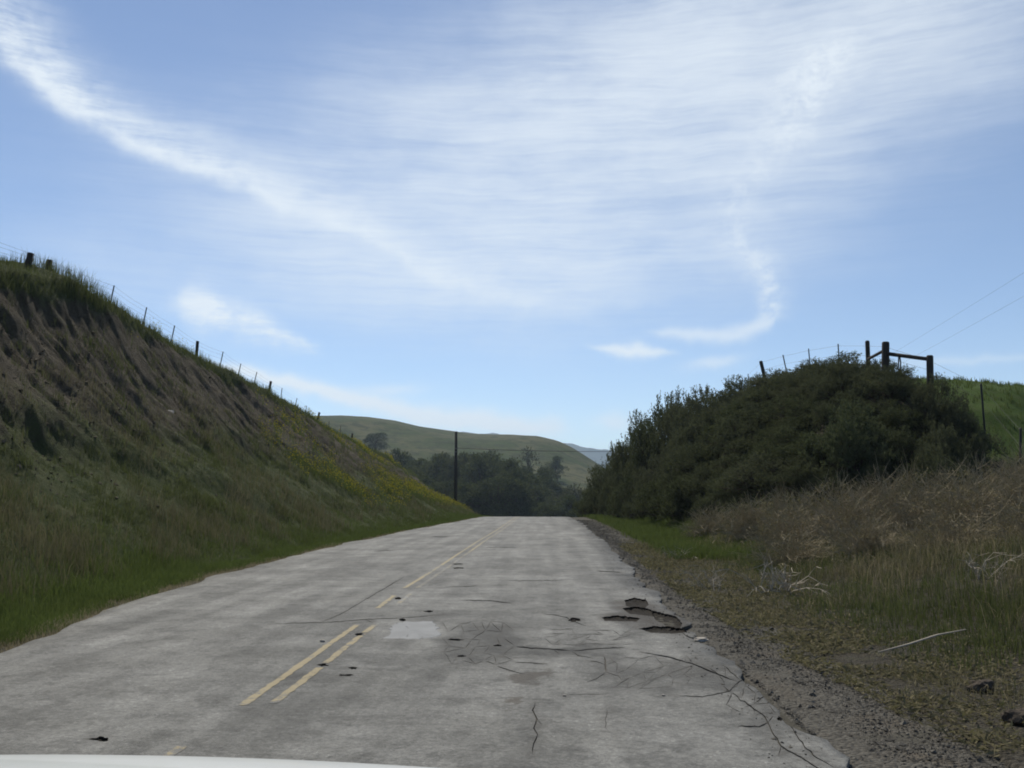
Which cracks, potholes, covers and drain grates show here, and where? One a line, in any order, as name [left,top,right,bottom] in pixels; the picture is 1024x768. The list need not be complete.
pothole [652,610,682,630]
pothole [622,607,654,617]
pothole [625,598,648,609]
crack [277,614,833,768]
pothole [639,626,687,634]
